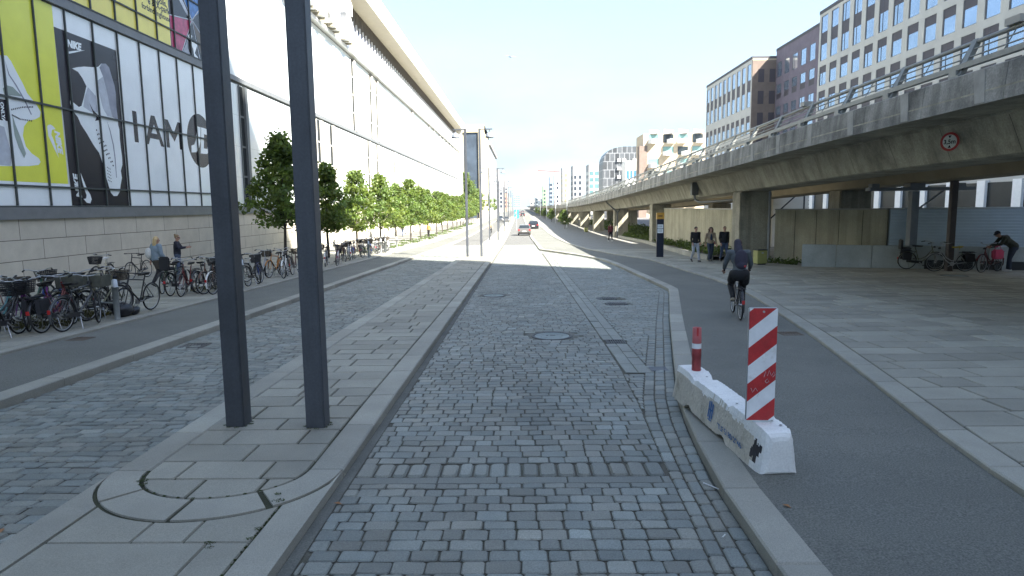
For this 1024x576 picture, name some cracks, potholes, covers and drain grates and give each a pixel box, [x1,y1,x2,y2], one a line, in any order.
manhole cover [525,331,579,341]
